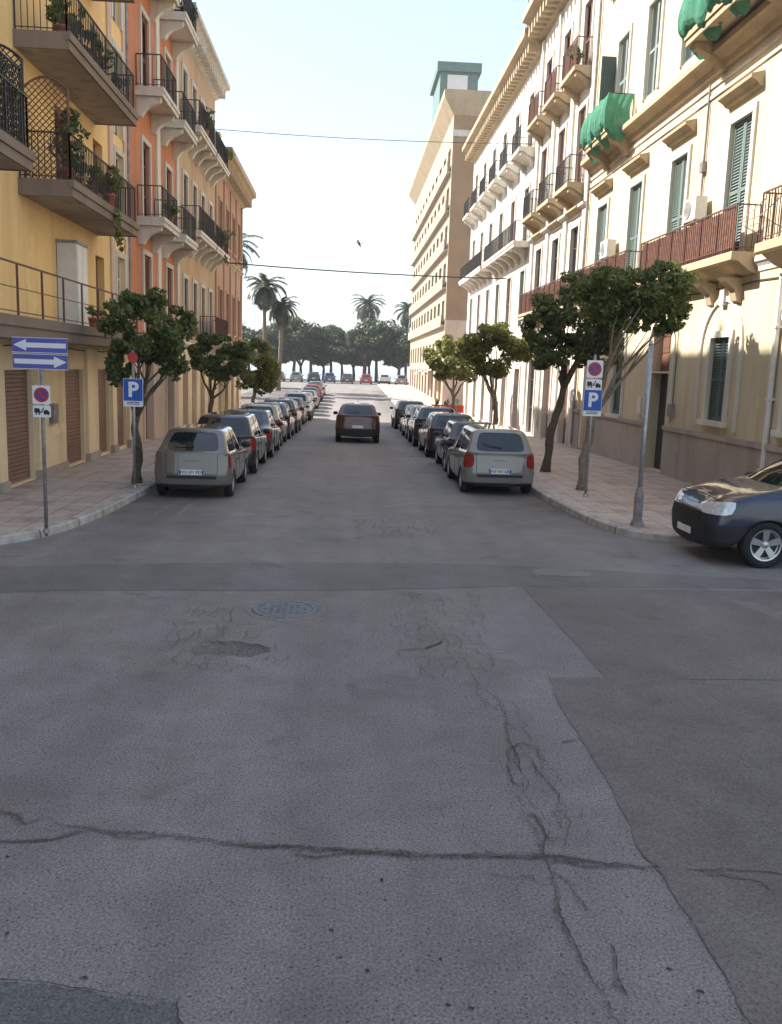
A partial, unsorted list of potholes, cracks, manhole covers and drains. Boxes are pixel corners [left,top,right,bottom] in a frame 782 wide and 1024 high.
crack [157,605,289,670]
manhole cover [244,599,326,621]
crack [357,518,435,537]
crack [390,593,499,709]
crack [0,700,782,1024]
pothole [191,641,271,658]
